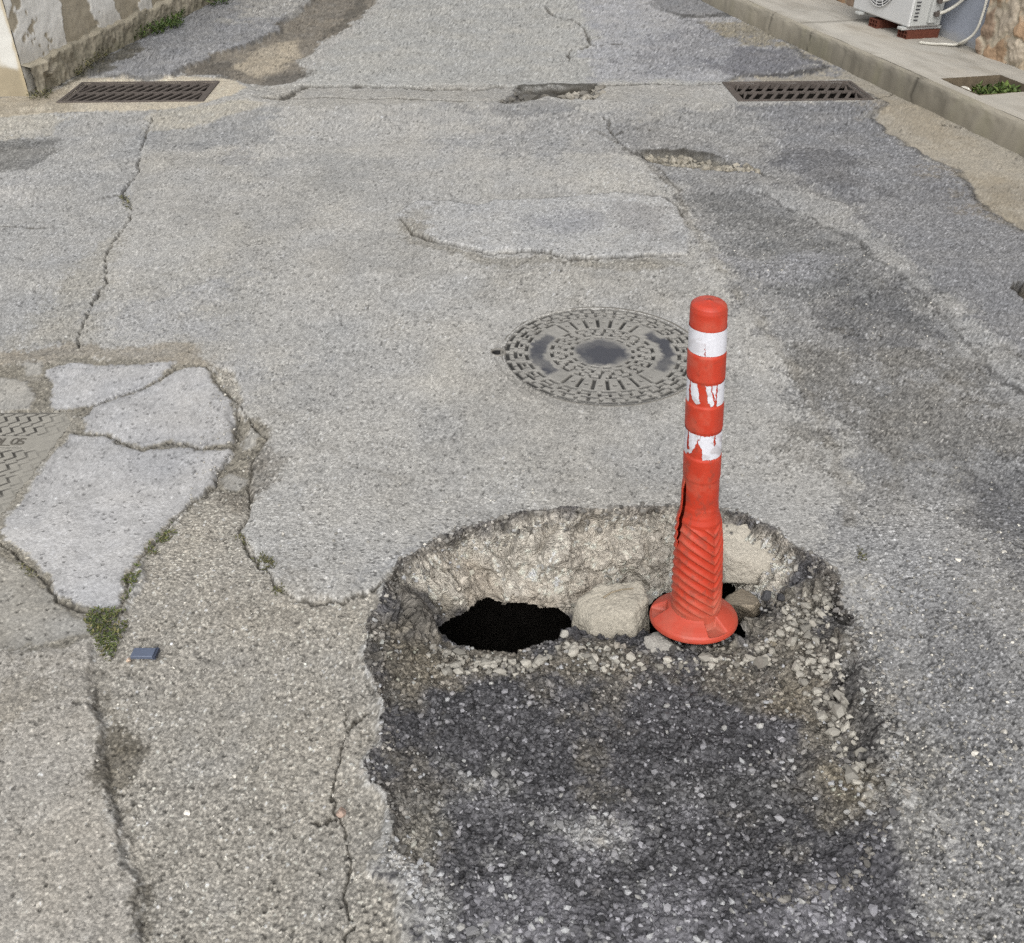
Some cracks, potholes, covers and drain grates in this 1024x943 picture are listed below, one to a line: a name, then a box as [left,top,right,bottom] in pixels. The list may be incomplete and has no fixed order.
pothole [636,148,760,174]
crack [0,111,383,618]
pothole [497,83,606,104]
crack [538,4,661,69]
manhole cover [491,307,688,407]
drain grate [722,80,875,102]
crack [308,702,370,943]
pothole [358,501,915,927]
crack [397,115,690,262]
